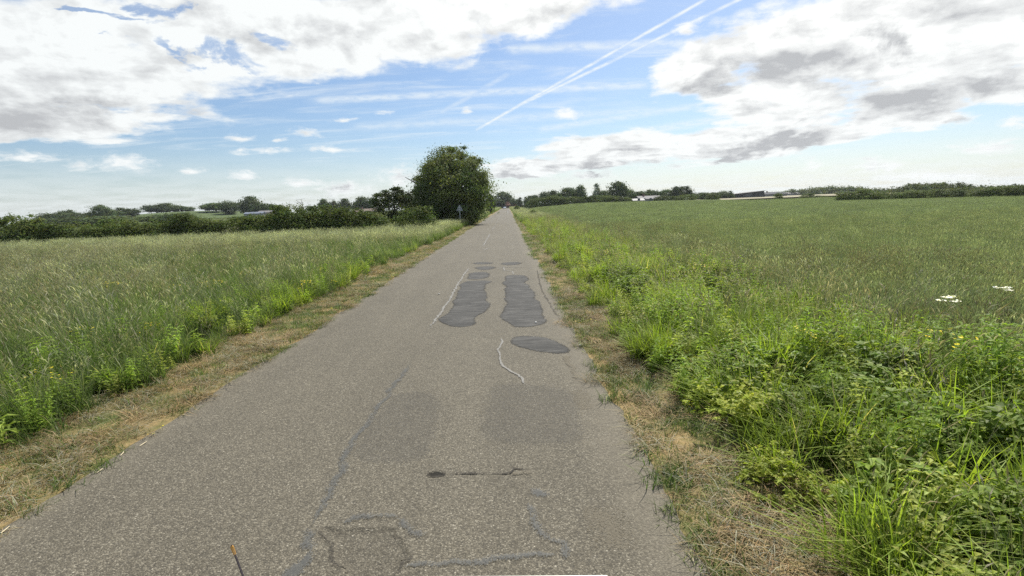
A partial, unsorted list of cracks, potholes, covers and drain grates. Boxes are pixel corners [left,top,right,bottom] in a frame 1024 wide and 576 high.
crack [430,269,468,327]
crack [497,339,524,383]
